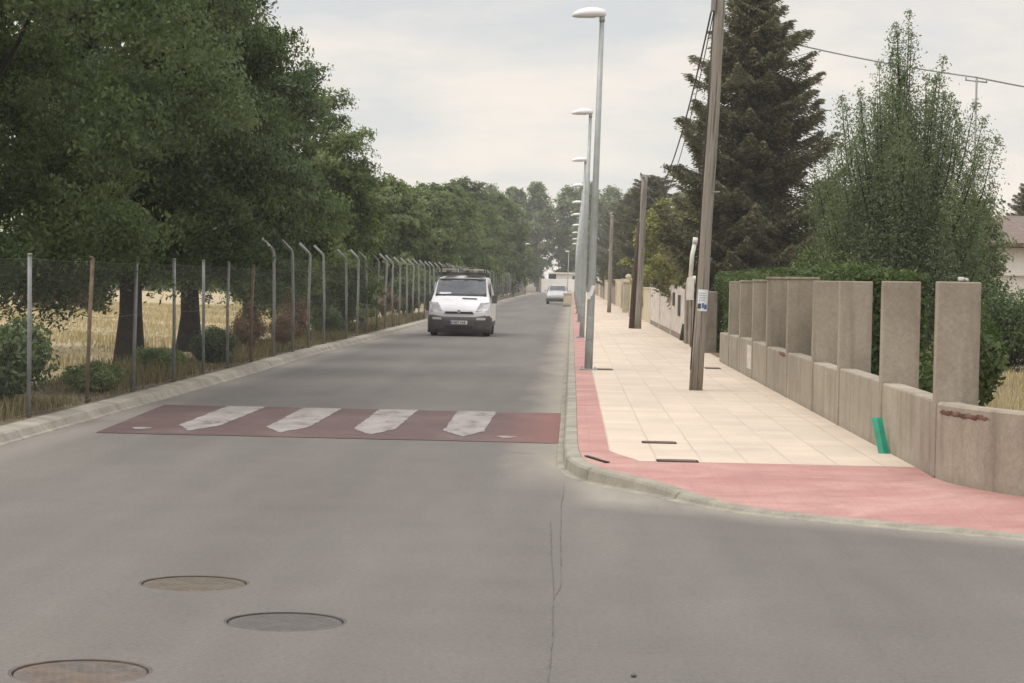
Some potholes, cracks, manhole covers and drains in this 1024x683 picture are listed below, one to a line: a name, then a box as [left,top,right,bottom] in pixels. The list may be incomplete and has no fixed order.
crack [548,491,564,683]
manhole cover [8,659,152,683]
manhole cover [139,575,249,591]
manhole cover [224,612,347,632]
